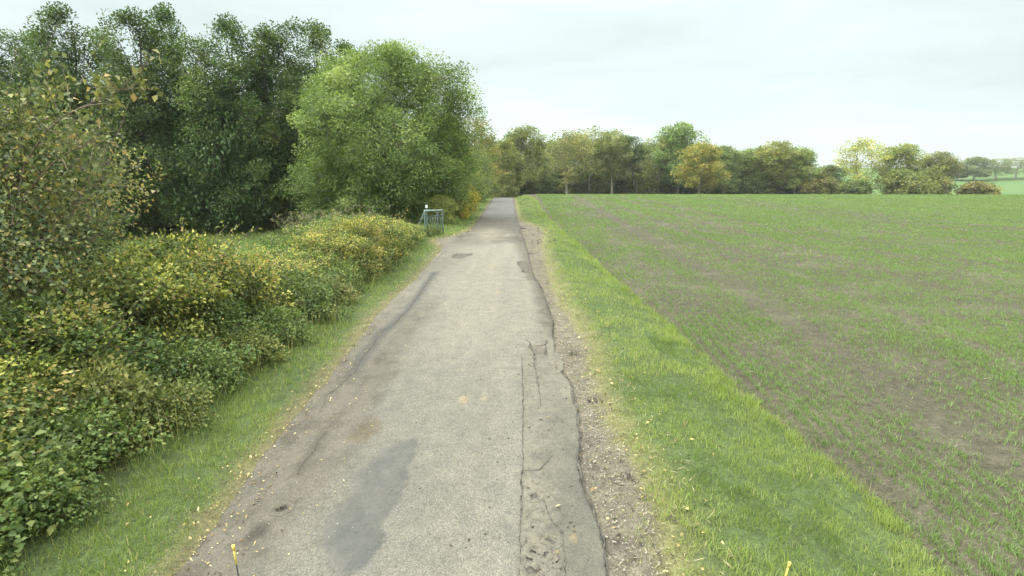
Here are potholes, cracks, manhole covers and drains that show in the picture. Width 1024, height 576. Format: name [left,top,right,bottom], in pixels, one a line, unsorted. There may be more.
pothole [516,260,531,274]
crack [297,433,326,474]
crack [523,456,552,471]
pothole [267,501,295,516]
crack [319,272,435,412]
